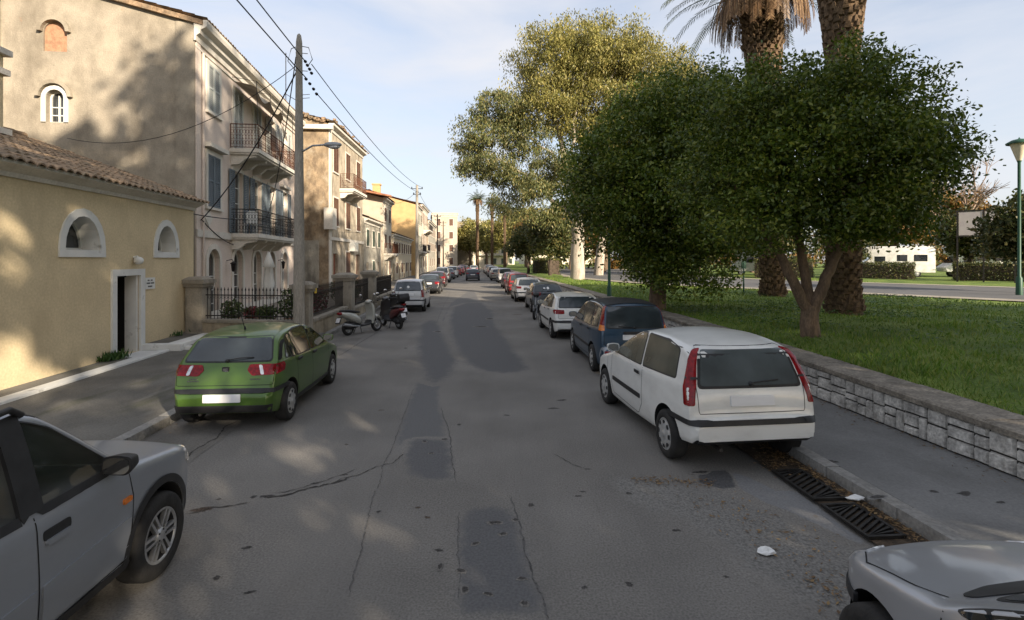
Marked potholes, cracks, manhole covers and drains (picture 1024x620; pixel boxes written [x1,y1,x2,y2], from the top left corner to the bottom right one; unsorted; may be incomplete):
crack [265,454,403,498]
drain grate [820,502,907,540]
drain grate [771,468,847,501]
